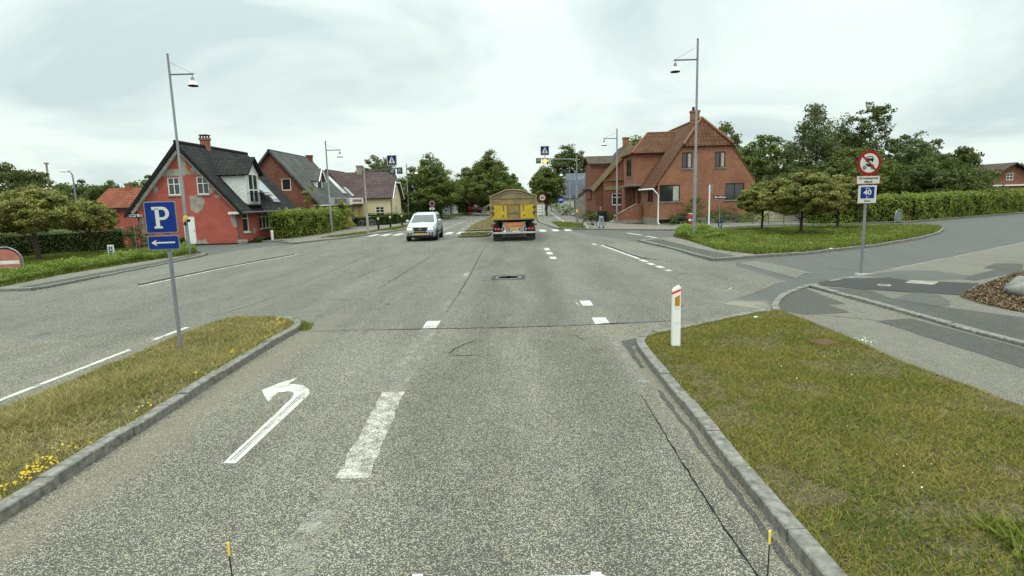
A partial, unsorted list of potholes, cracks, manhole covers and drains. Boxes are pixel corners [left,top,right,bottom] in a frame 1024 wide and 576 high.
crack [642,397,759,576]
crack [347,319,695,356]
